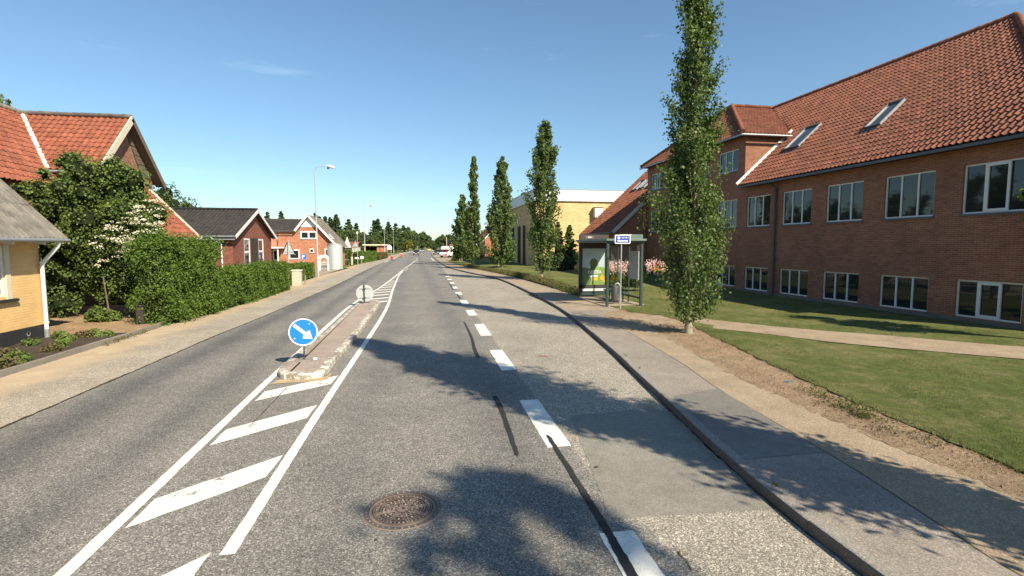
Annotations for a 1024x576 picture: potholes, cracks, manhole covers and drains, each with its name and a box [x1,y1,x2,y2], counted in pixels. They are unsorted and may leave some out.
manhole cover [362,491,442,531]
